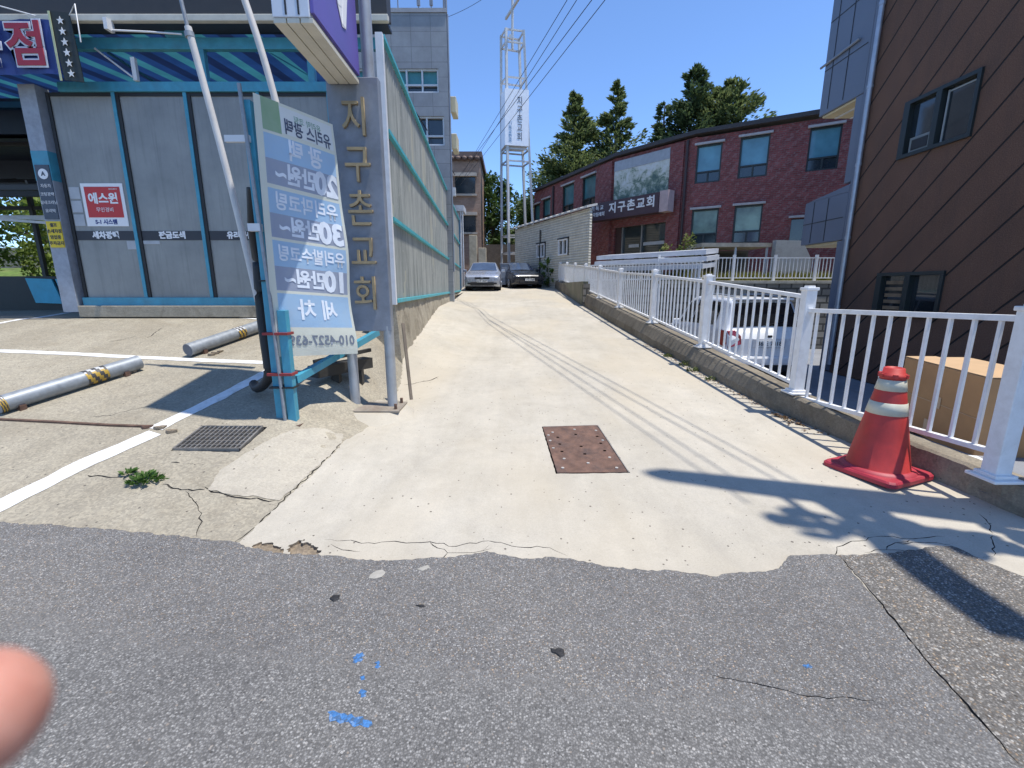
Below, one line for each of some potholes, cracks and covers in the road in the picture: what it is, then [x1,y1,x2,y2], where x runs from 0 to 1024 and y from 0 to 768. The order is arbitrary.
crack [330,539,565,557]
pothole [252,542,284,553]
pothole [287,539,322,555]
crack [835,516,996,557]
manhole cover [542,425,630,474]
drain grate [172,425,264,452]
crack [88,475,275,535]
